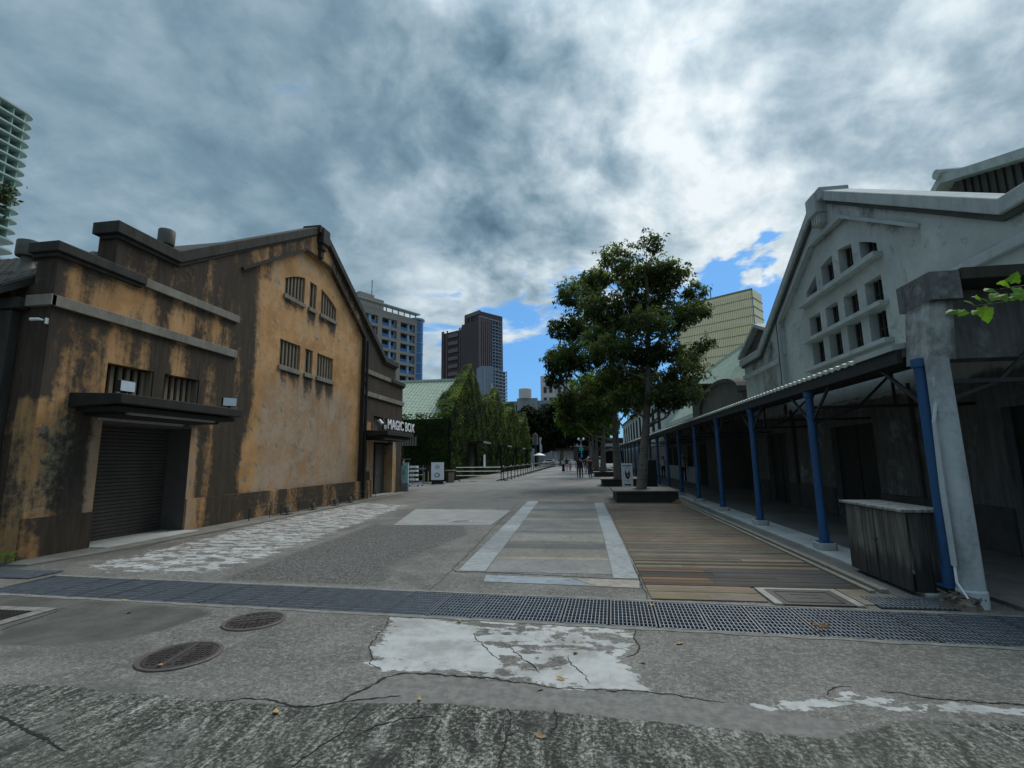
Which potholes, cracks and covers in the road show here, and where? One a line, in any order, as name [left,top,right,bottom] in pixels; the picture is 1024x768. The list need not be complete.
manhole cover [221,611,286,631]
drain grate [610,600,658,628]
drain grate [653,602,710,631]
drain grate [307,588,381,611]
drain grate [861,596,963,611]
drain grate [471,594,528,620]
crack [0,716,65,751]
manhole cover [754,587,866,608]
manhole cover [133,641,224,672]
drain grate [515,596,567,623]
drain grate [428,593,489,618]
drain grate [346,590,416,613]
